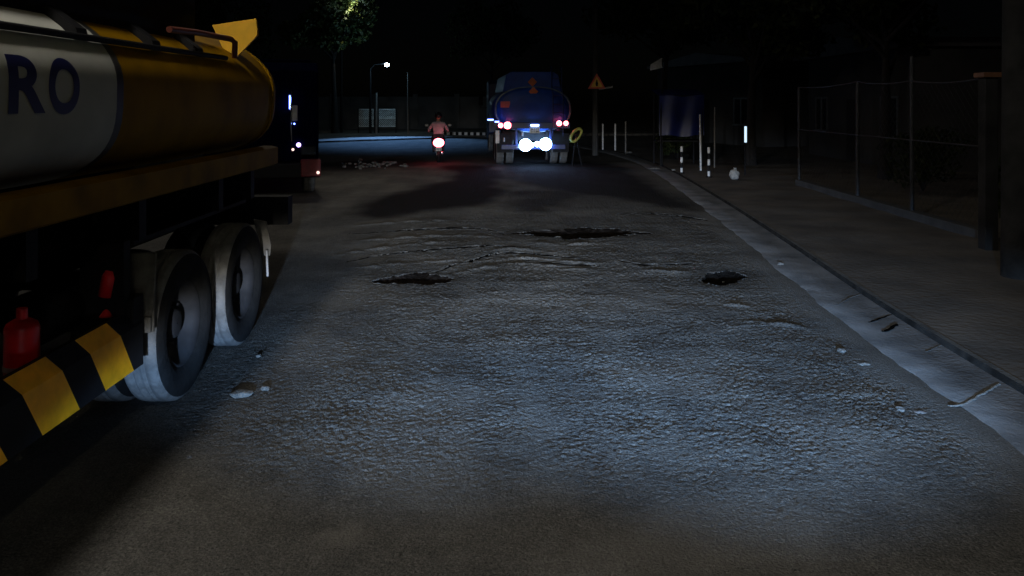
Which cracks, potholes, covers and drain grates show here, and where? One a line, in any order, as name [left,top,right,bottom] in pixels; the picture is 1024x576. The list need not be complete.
pothole [701,271,748,286]
crack [839,294,899,332]
pothole [512,227,656,240]
crack [948,383,1001,407]
pothole [371,272,455,285]
crack [343,227,707,273]
